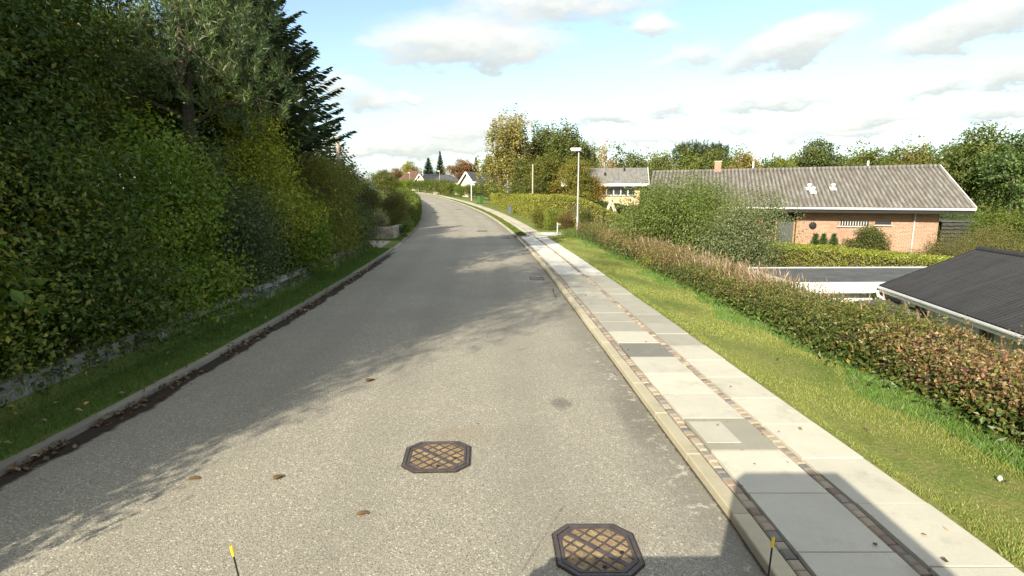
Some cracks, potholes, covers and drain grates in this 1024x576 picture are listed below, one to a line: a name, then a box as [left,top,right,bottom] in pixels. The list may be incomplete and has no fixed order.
manhole cover [551,524,645,576]
manhole cover [401,441,471,474]
